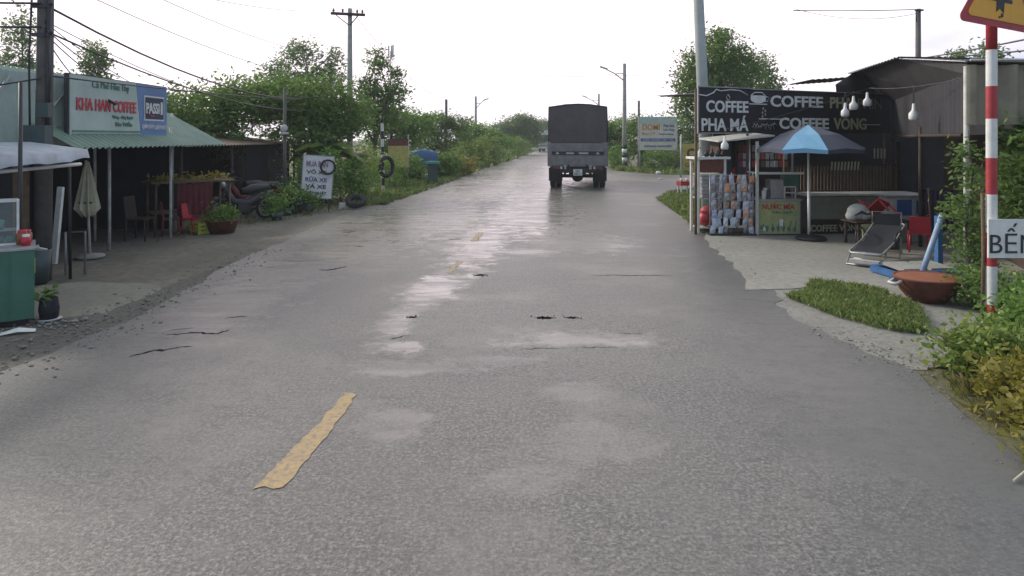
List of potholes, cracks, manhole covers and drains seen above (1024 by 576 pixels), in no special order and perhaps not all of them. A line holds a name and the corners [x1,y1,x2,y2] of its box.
crack [129,316,247,357]
